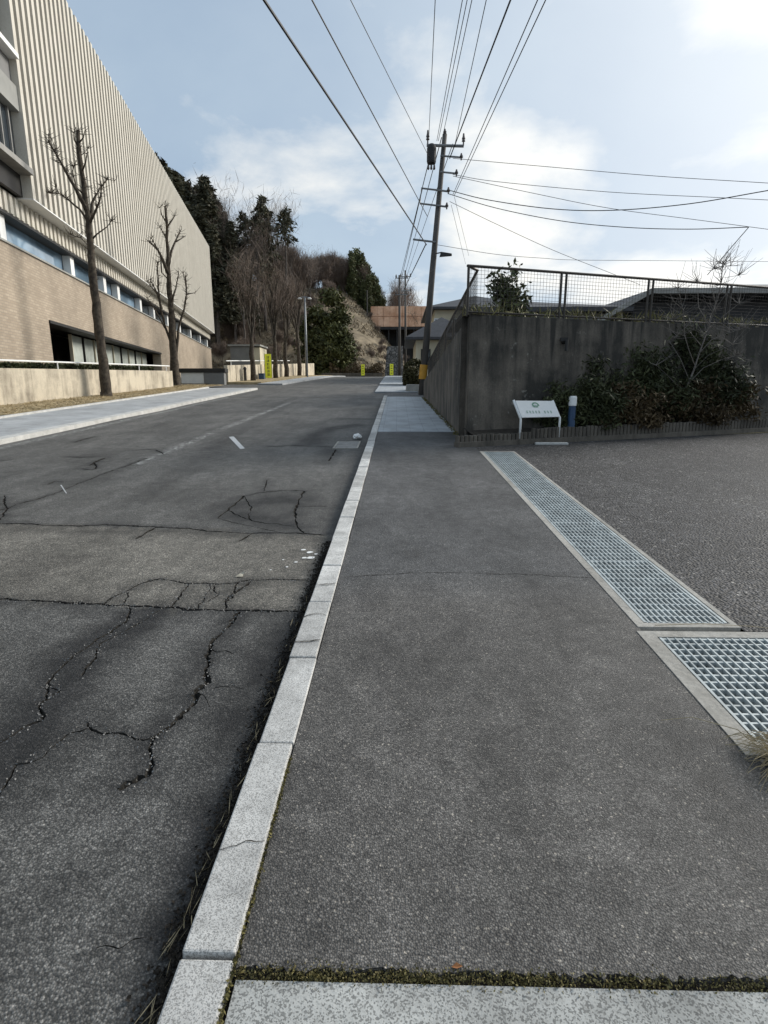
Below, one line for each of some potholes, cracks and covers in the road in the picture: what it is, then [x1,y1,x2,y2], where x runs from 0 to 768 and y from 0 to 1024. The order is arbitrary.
drain grate [494,463,544,478]
drain grate [525,496,600,523]
drain grate [508,477,567,497]
drain grate [484,452,526,463]
crack [0,579,306,794]
drain grate [586,561,727,624]
drain grate [550,522,649,561]
crack [0,436,321,542]
drain grate [659,638,768,742]
